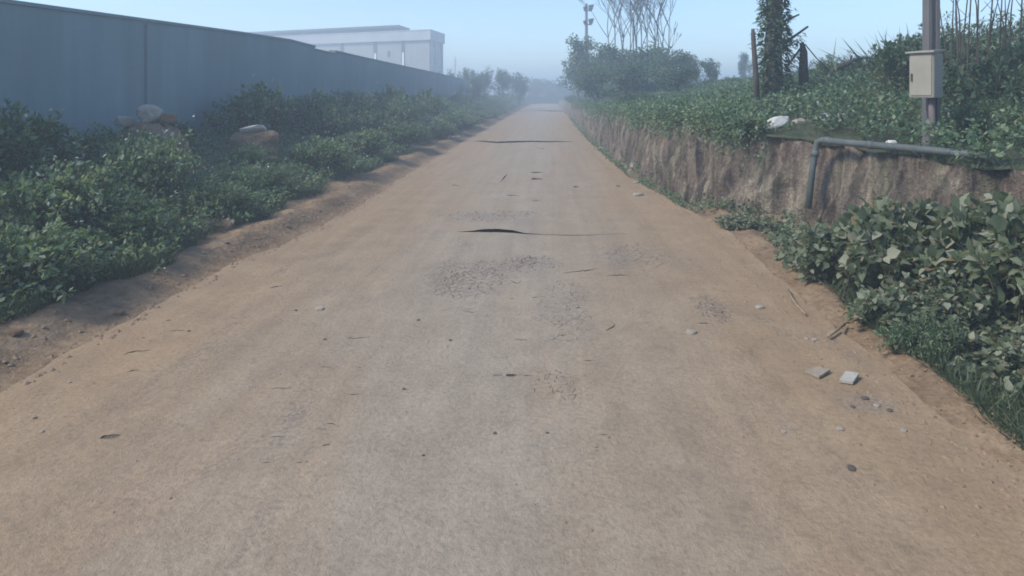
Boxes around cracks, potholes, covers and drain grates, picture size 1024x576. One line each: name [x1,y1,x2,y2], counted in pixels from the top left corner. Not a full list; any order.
crack [424,176,691,341]
crack [478,141,573,149]
crack [525,370,582,401]
